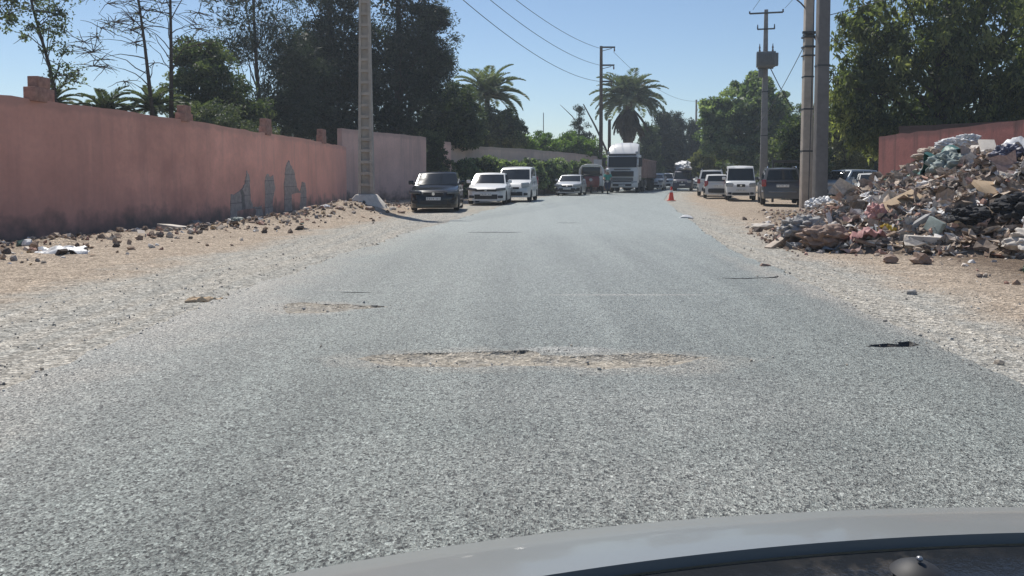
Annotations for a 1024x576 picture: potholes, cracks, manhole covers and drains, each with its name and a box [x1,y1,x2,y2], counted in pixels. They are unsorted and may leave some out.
pothole [283,302,386,313]
pothole [357,350,708,369]
